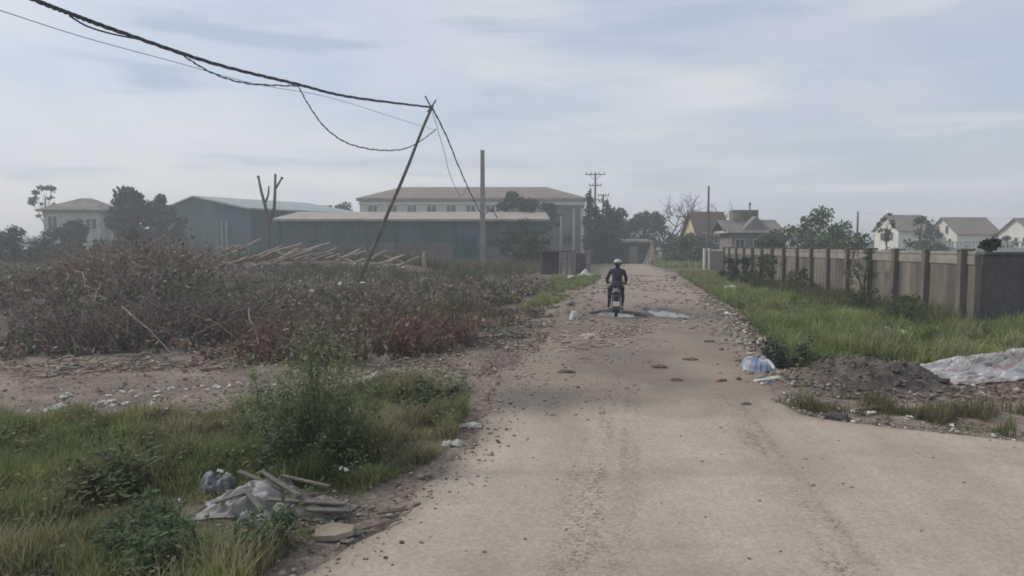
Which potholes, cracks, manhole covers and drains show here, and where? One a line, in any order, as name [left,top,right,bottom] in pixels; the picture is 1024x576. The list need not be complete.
pothole [585,309,652,319]
pothole [638,307,700,320]
